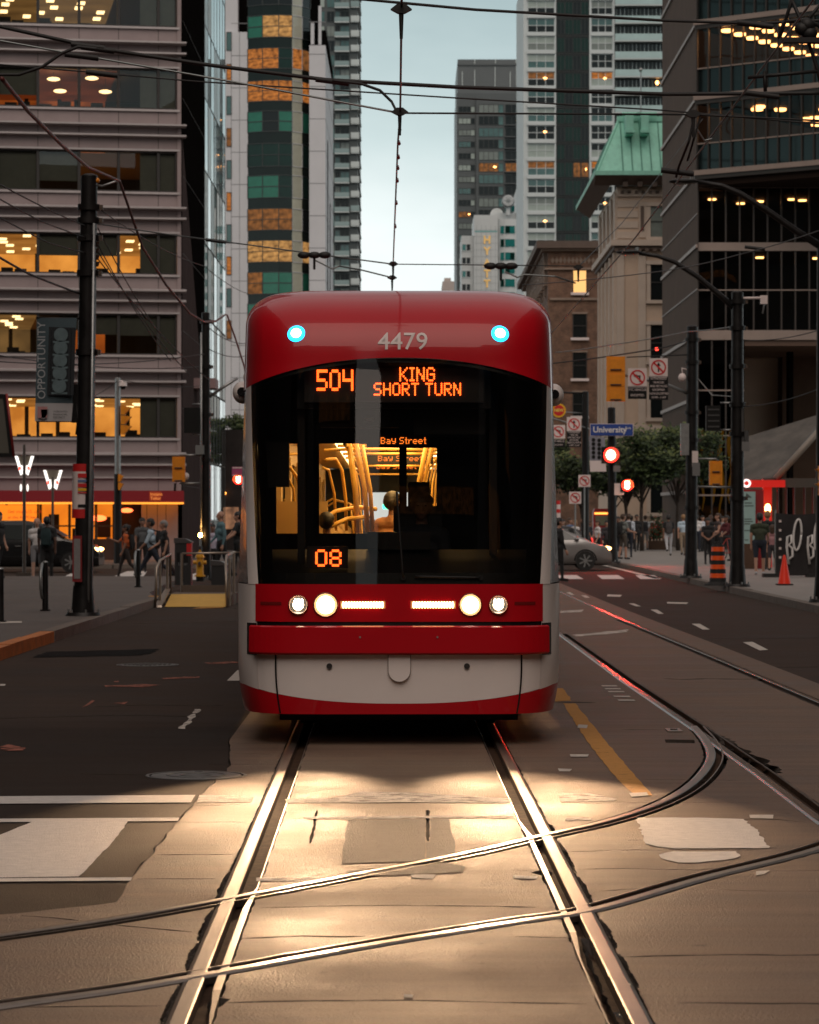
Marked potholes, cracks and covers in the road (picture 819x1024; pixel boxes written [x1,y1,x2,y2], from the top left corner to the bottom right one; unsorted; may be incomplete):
manhole cover [145,771,247,784]
crack [309,810,430,843]
